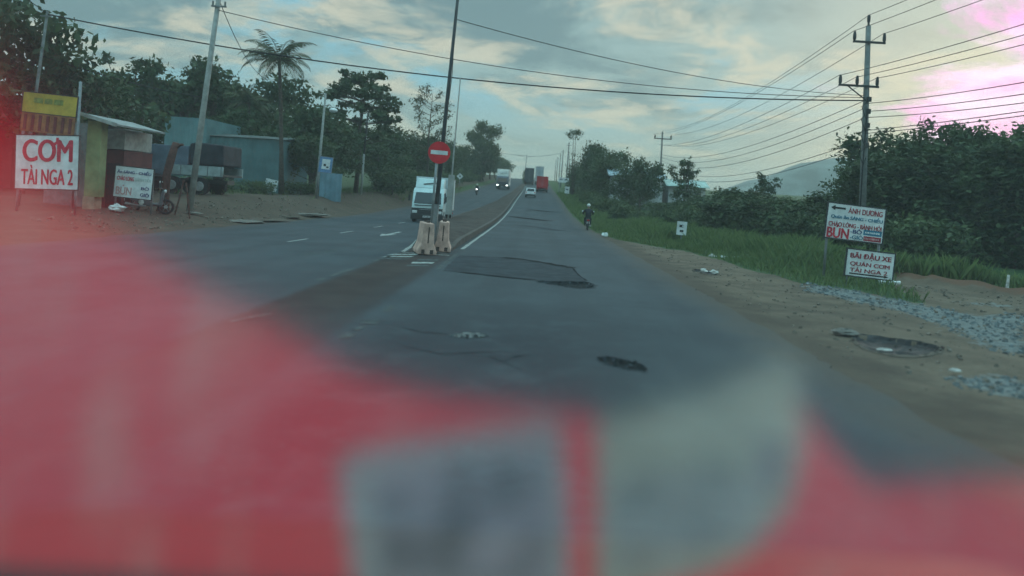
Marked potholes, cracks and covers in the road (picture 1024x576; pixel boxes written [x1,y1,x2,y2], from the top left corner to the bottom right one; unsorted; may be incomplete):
pothole [595,356,649,373]
crack [407,328,529,370]
pothole [534,281,598,289]
